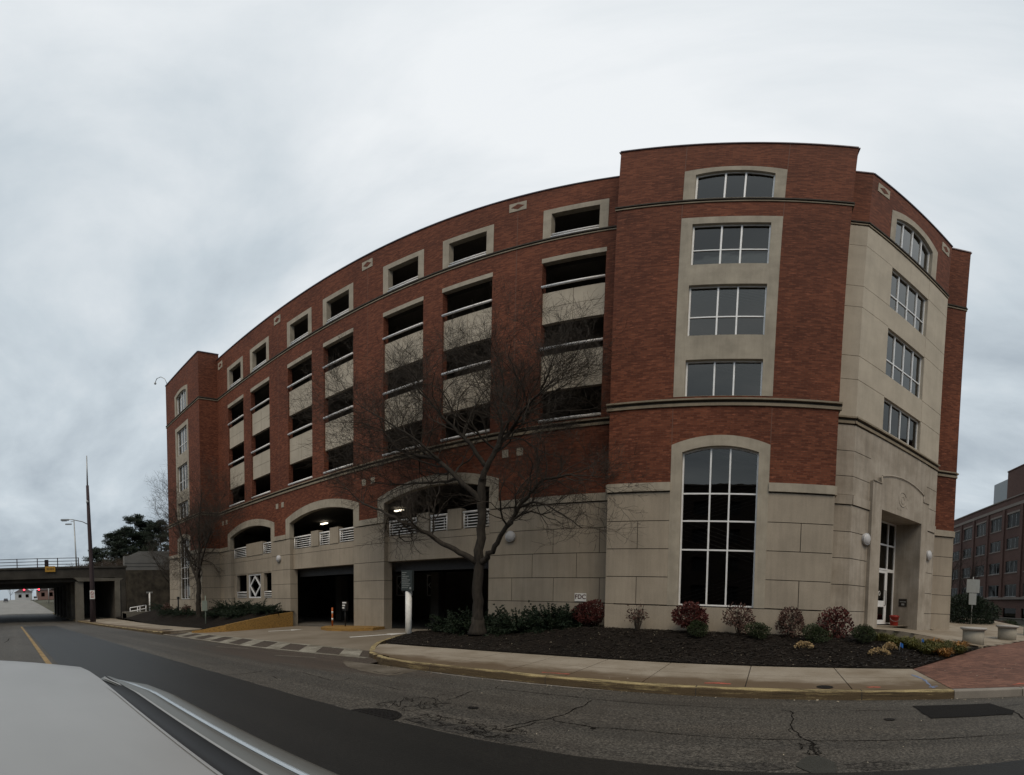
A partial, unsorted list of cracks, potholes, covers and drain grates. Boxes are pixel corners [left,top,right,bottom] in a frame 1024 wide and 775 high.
manhole cover [353,708,402,720]
crack [785,710,821,756]
crack [371,682,593,738]
